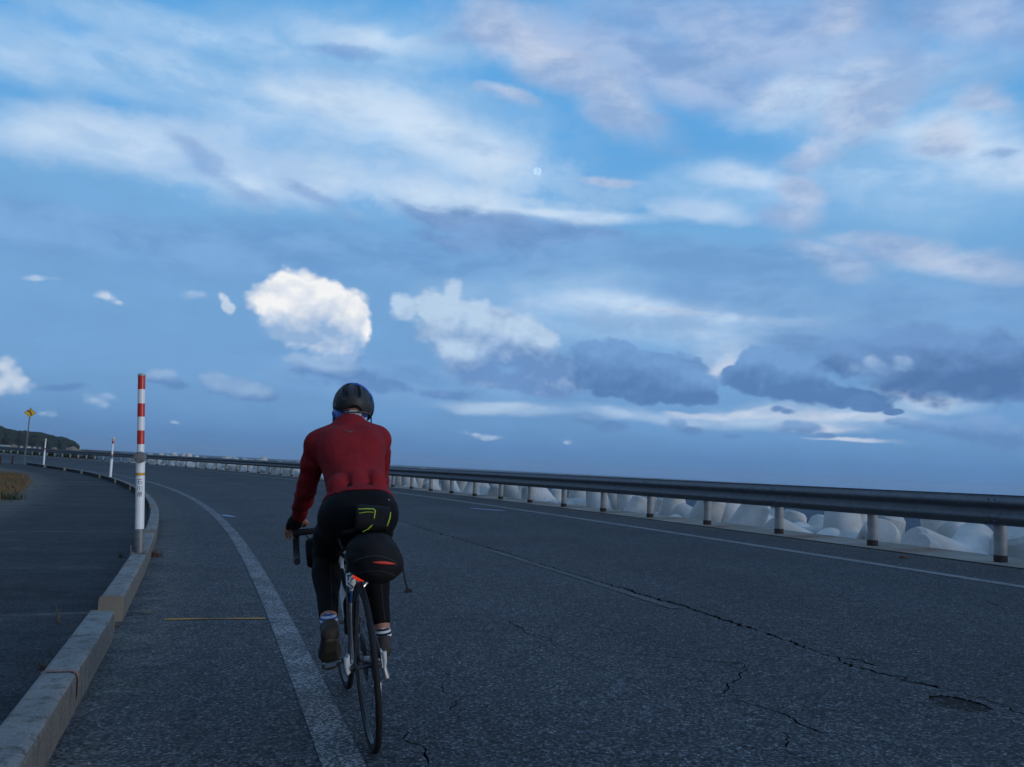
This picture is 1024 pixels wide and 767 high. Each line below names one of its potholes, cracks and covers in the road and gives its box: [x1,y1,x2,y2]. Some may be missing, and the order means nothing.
crack [508,620,824,766]
crack [400,522,1024,714]
pothole [927,695,994,712]
crack [396,726,429,766]
